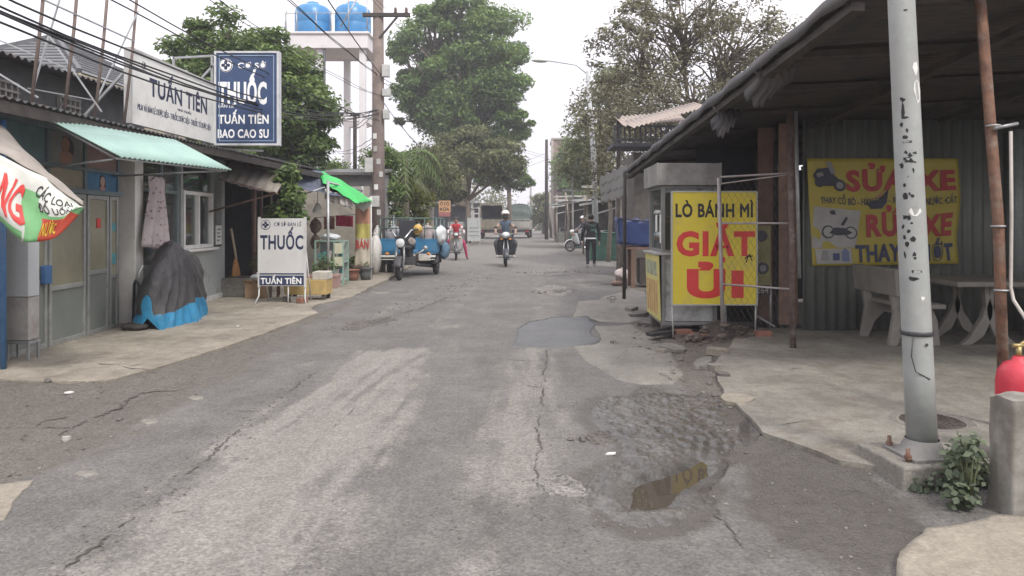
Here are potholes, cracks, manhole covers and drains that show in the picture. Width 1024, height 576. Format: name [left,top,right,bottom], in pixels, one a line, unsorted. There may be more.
pothole [624,459,729,512]
pothole [739,418,761,447]
manhole cover [889,411,978,432]
crack [57,373,316,572]
crack [698,508,743,547]
crack [20,363,189,442]
crack [504,350,558,487]
pothole [585,431,617,445]
